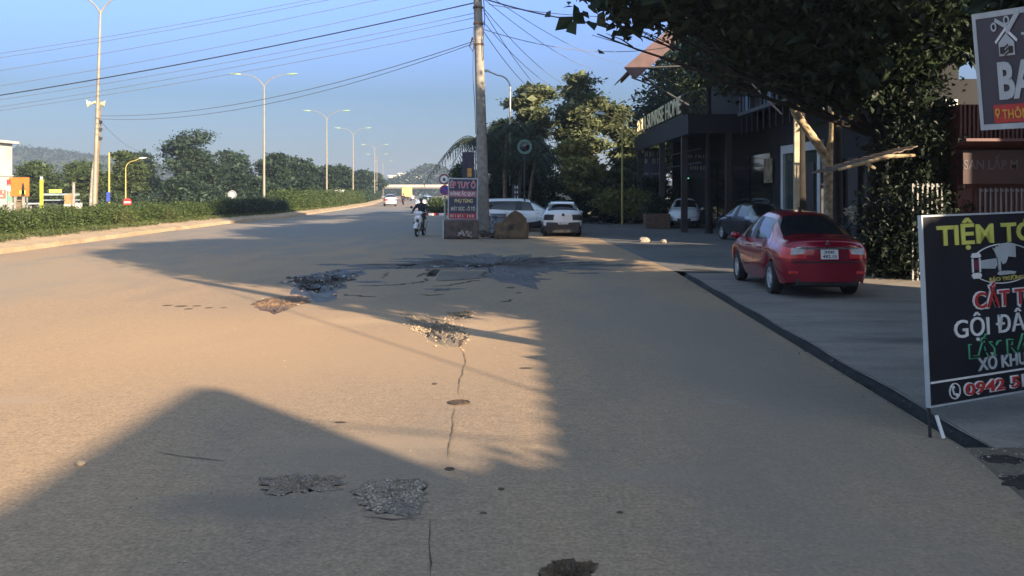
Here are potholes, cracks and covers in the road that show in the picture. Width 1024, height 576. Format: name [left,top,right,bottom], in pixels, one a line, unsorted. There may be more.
pothole [538,558,598,576]
pothole [350,477,429,518]
pothole [277,269,368,303]
pothole [258,473,349,495]
pothole [978,454,1024,465]
pothole [404,314,466,347]
pothole [998,474,1024,490]
